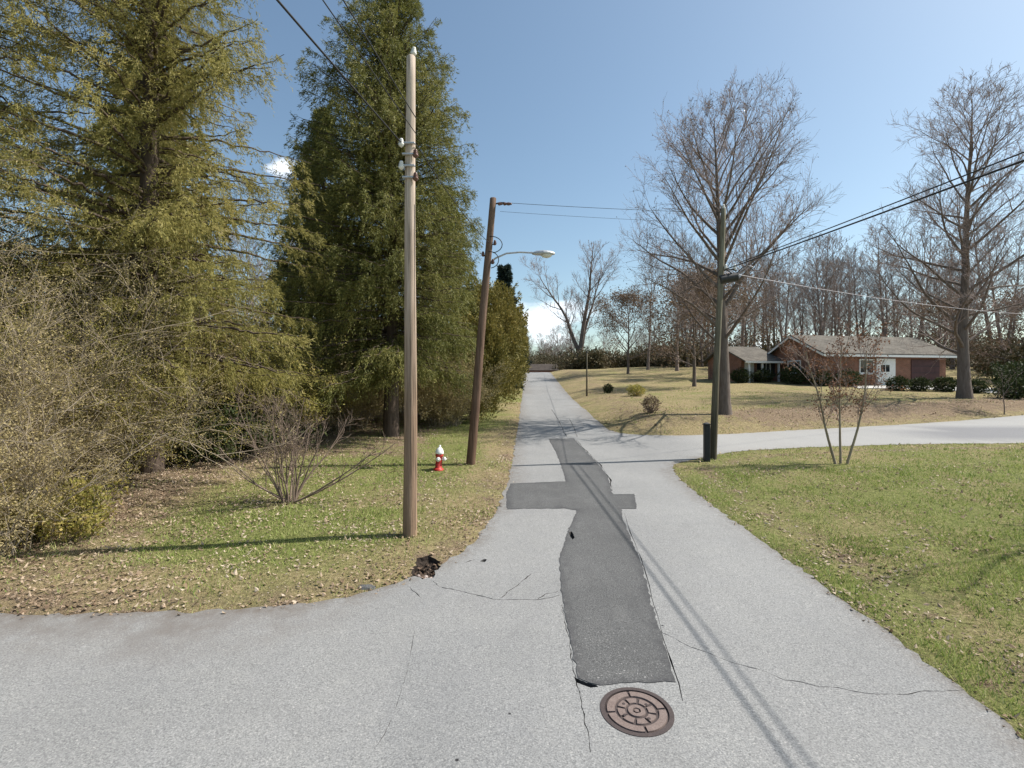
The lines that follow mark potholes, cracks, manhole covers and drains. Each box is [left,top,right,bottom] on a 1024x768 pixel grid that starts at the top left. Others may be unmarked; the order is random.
manhole cover [600,687,675,737]
crack [662,632,958,695]
crack [411,574,591,752]
pothole [411,556,441,579]
